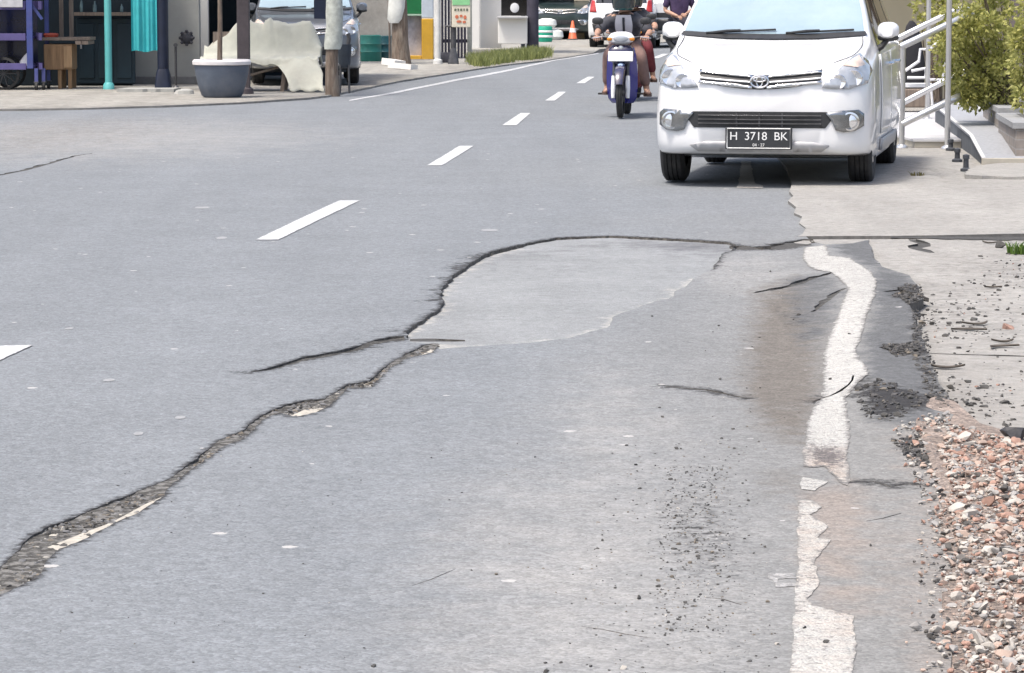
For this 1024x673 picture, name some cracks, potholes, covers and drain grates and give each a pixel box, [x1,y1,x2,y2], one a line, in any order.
crack [754,272,847,312]
crack [729,239,814,250]
crack [0,336,465,594]
